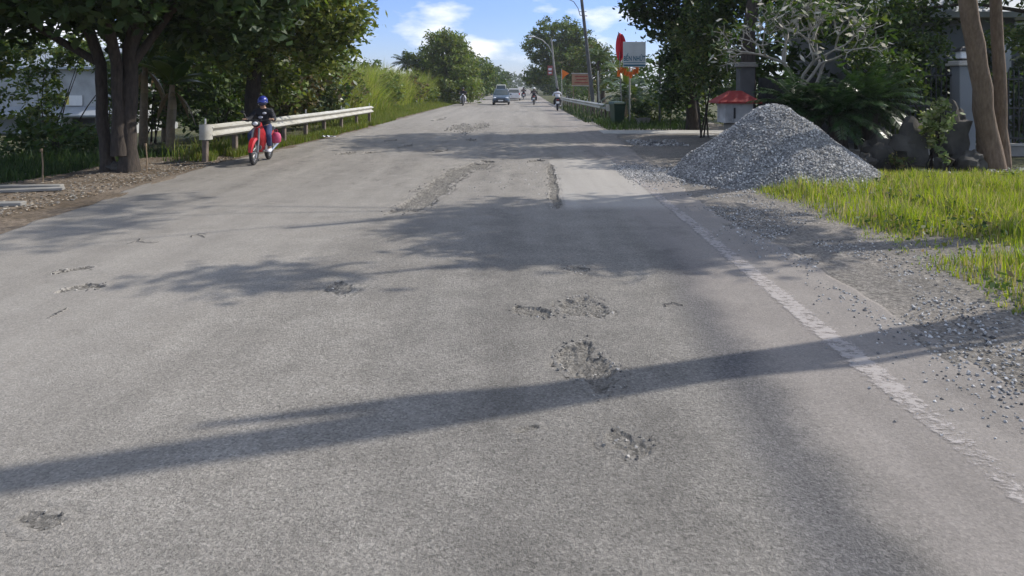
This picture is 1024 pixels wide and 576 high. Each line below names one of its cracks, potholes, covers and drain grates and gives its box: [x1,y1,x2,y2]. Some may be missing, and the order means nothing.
pothole [46,281,115,297]
pothole [45,265,100,276]
pothole [543,162,565,213]
pothole [506,302,557,322]
pothole [551,335,631,404]
pothole [561,264,597,276]
pothole [381,162,494,217]
pothole [0,503,82,541]
pothole [594,424,665,469]
pothole [553,293,618,325]
crack [47,307,68,318]
pothole [317,279,365,299]
